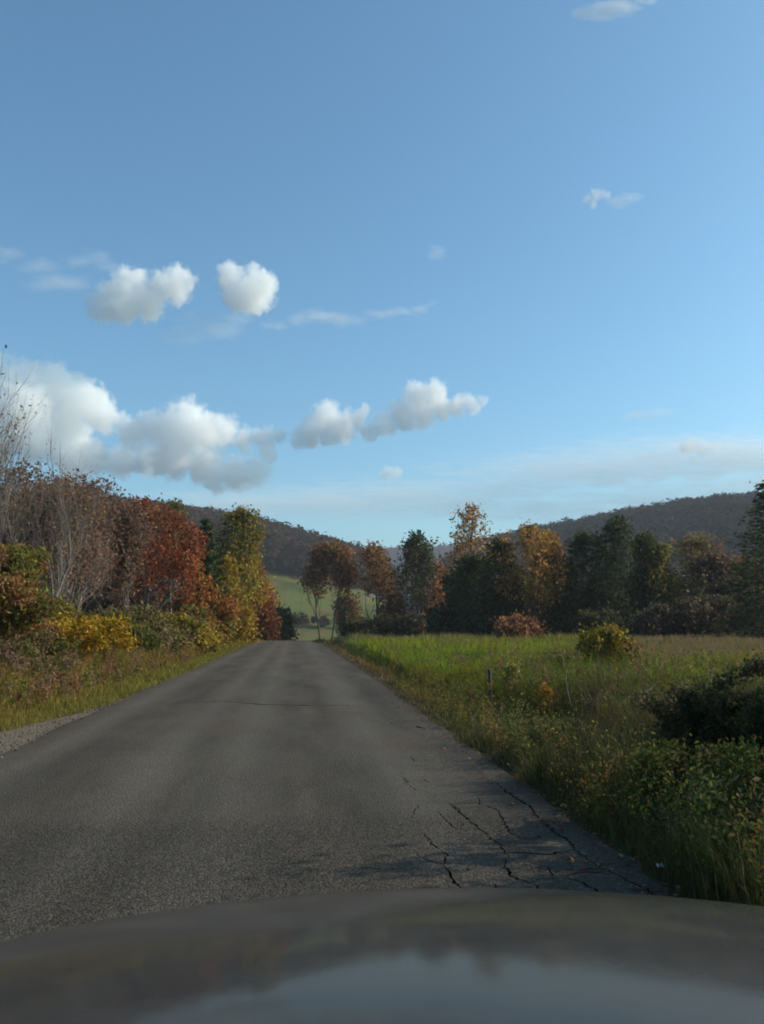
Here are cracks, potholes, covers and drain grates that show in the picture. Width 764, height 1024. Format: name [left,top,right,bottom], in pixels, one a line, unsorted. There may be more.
crack [403,778,672,897]
